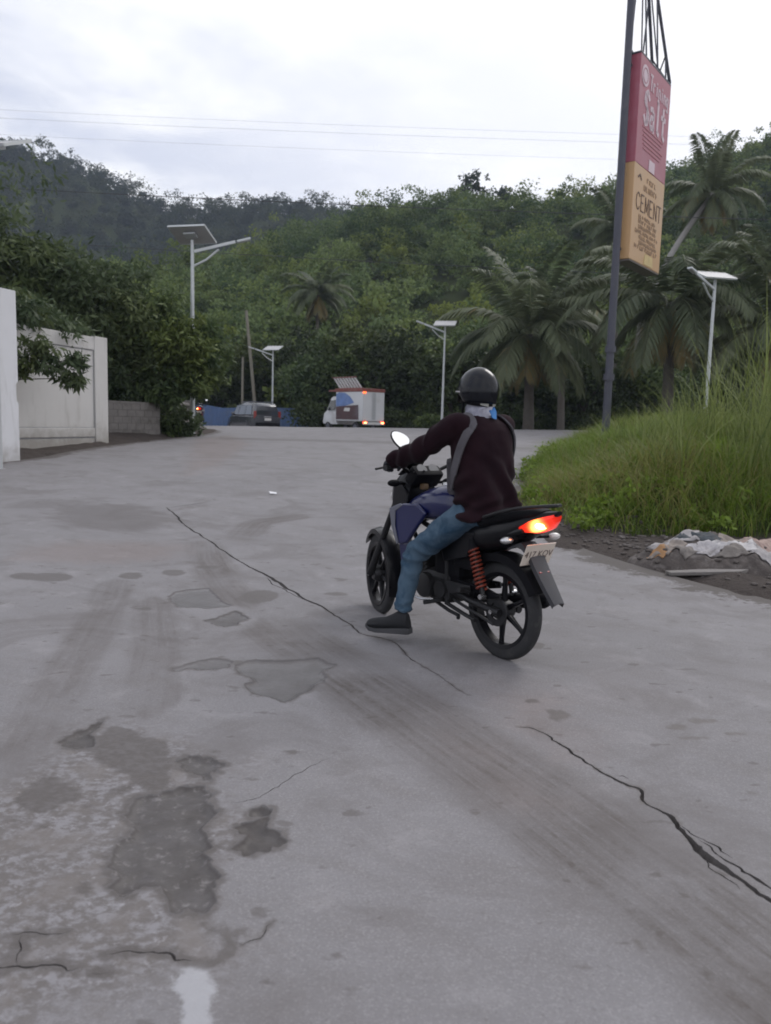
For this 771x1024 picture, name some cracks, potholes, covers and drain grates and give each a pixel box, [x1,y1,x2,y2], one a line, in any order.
crack [92,950,191,974]
crack [167,502,464,693]
pothole [171,658,234,671]
pothole [234,657,337,703]
pothole [105,784,222,916]
crack [522,727,771,903]
crack [0,930,73,971]
pothole [229,804,289,857]
crack [234,758,329,803]
